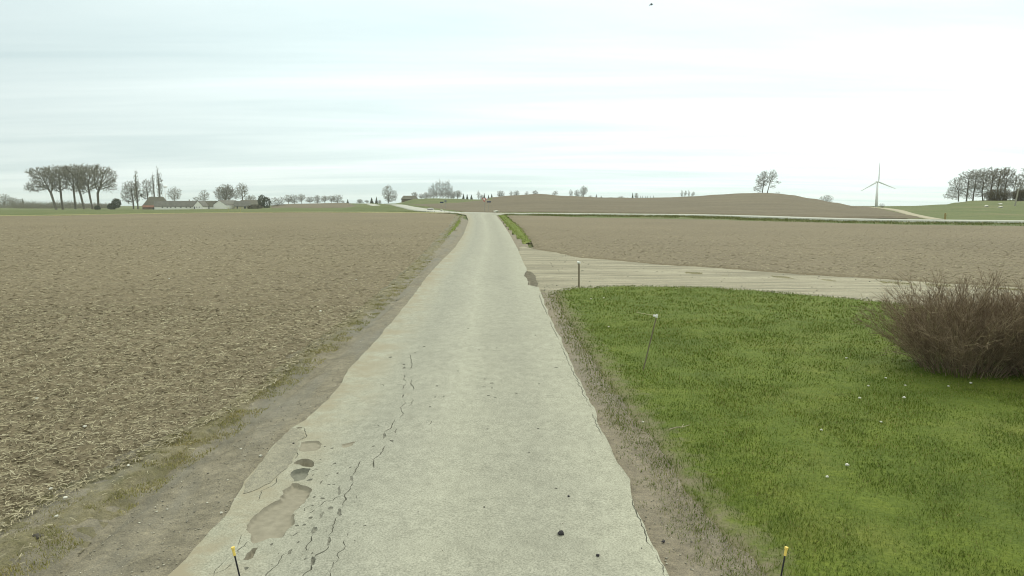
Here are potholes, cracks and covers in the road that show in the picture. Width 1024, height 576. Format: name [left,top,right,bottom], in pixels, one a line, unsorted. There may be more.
crack [265,355,414,576]
pothole [299,441,322,452]
pothole [290,468,311,481]
pothole [294,459,314,467]
pothole [525,271,538,287]
pothole [246,483,312,543]
